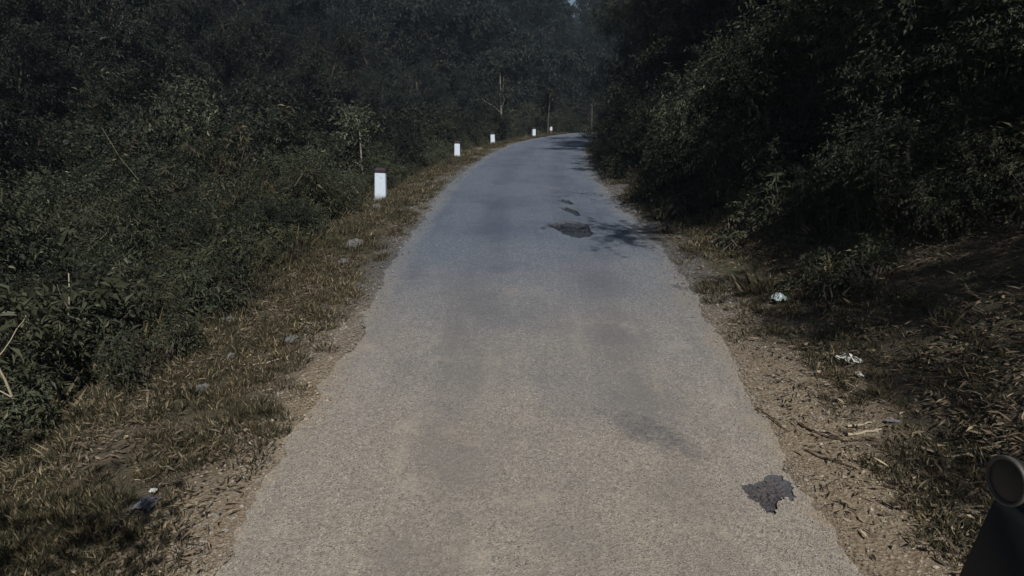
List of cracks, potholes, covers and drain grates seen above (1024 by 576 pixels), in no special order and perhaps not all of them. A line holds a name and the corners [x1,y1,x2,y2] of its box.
pothole [547,221,593,238]
pothole [740,475,797,514]
